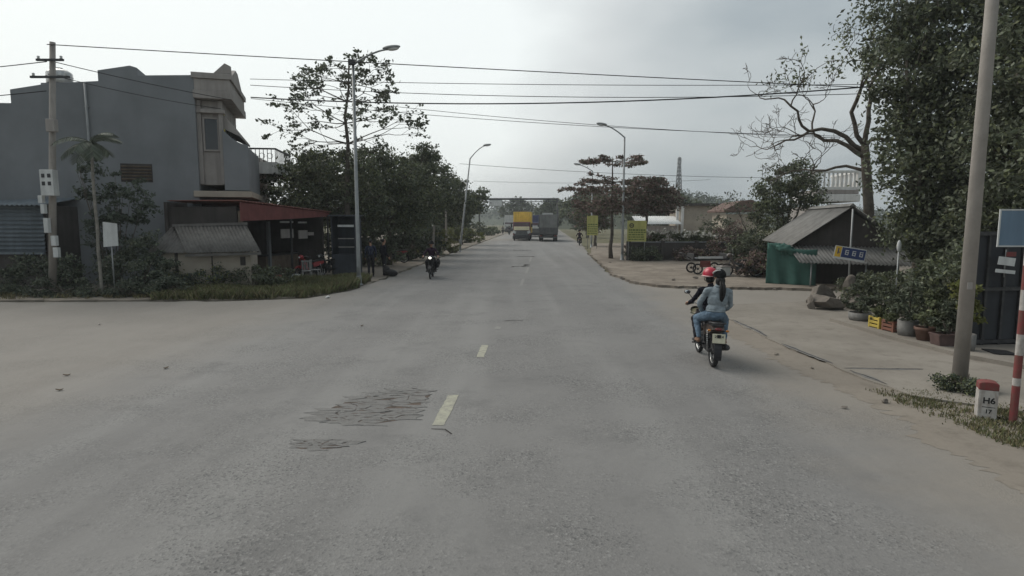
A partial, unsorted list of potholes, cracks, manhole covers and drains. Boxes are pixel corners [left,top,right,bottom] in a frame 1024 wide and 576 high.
crack [289,388,452,451]
